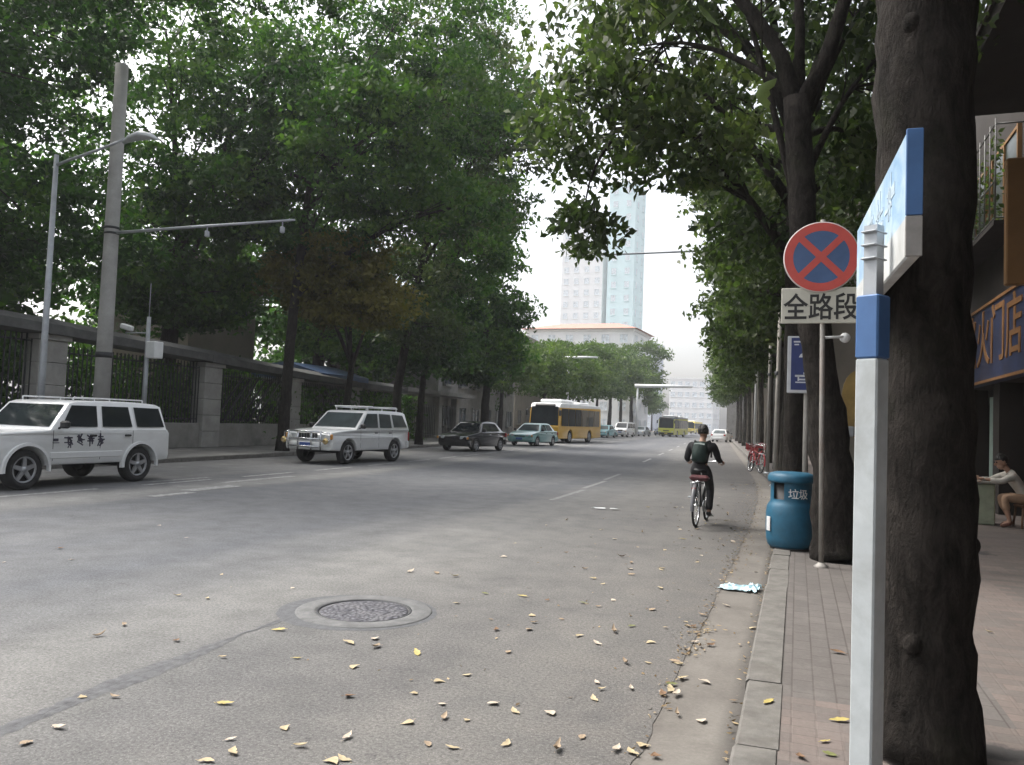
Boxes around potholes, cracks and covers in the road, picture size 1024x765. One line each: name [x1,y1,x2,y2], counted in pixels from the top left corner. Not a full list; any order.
manhole cover [275,595,437,631]
